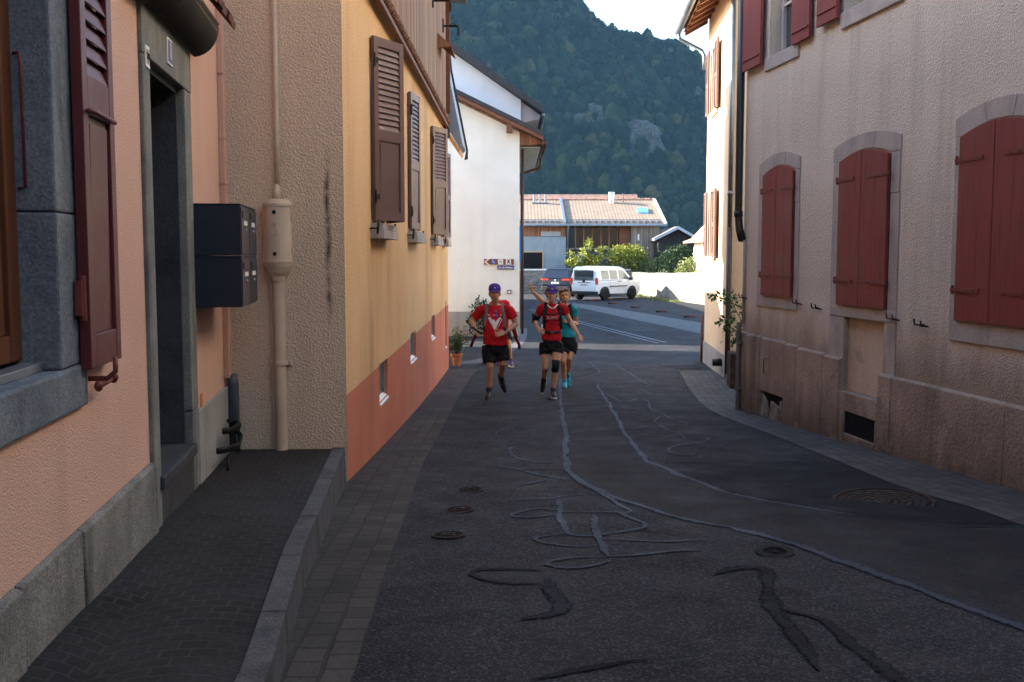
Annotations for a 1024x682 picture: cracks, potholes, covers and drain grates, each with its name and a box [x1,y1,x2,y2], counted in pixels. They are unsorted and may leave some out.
manhole cover [444,505,474,514]
manhole cover [755,544,795,558]
manhole cover [831,488,936,507]
manhole cover [431,531,466,540]
